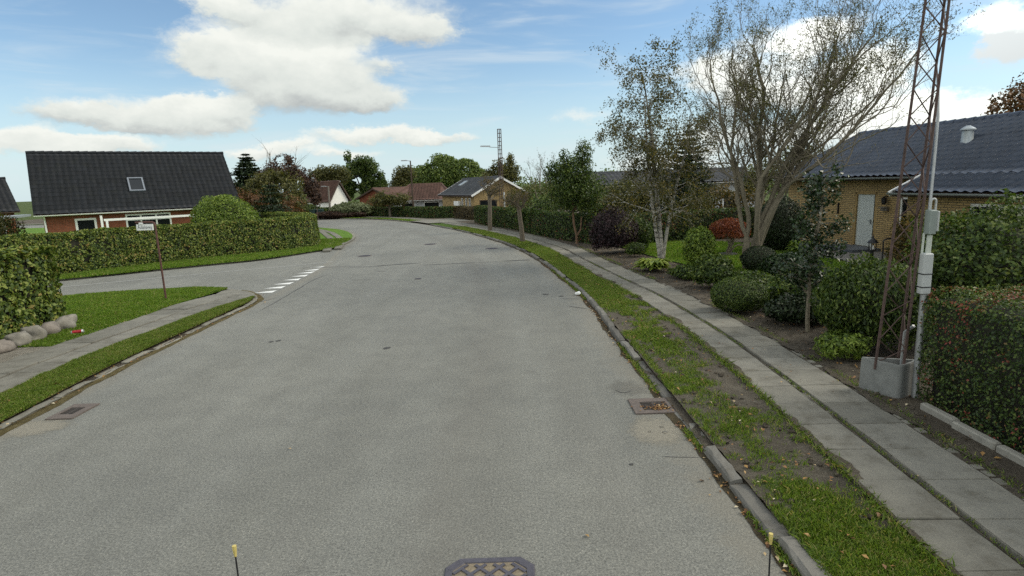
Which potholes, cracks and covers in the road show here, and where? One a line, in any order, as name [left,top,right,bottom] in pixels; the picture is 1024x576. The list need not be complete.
drain grate [45,403,100,420]
drain grate [628,398,676,415]
manhole cover [444,557,535,576]
